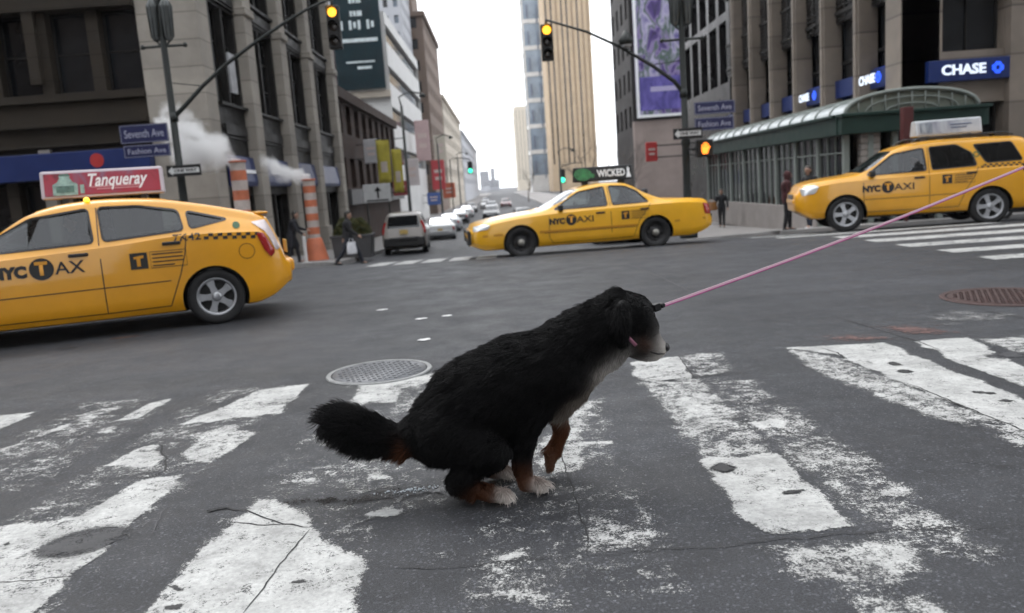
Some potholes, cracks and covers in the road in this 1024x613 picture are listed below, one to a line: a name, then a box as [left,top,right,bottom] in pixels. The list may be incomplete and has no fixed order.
crack [590,525,1013,556]
pothole [707,462,736,473]
crack [210,506,303,527]
manhole cover [939,287,1024,306]
manhole cover [326,359,432,385]
pothole [15,524,143,563]
crack [389,554,588,568]
crack [147,444,168,478]
